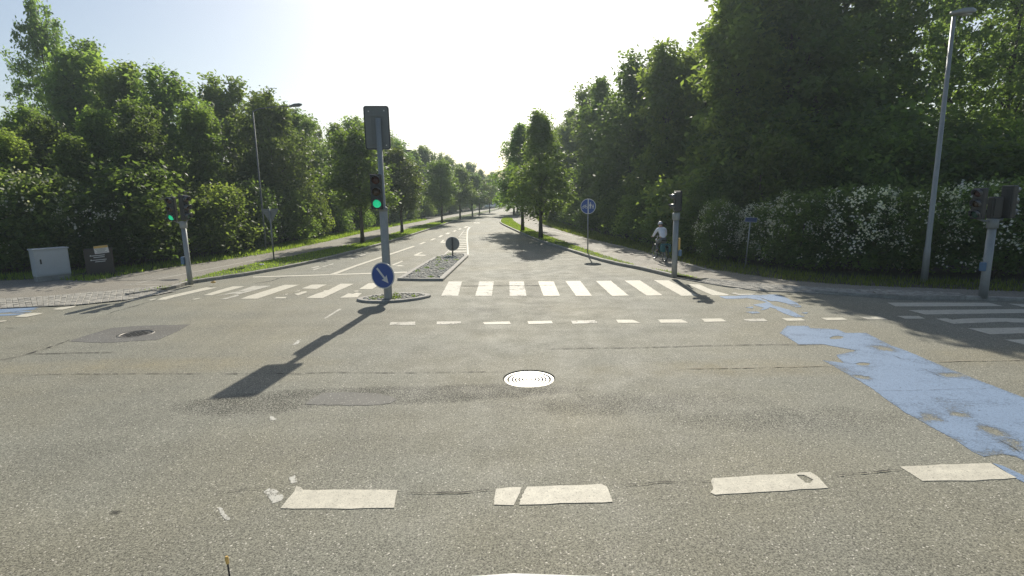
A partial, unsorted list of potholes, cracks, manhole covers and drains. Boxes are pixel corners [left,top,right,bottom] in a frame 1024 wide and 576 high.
manhole cover [503,370,555,387]
manhole cover [116,330,156,338]
